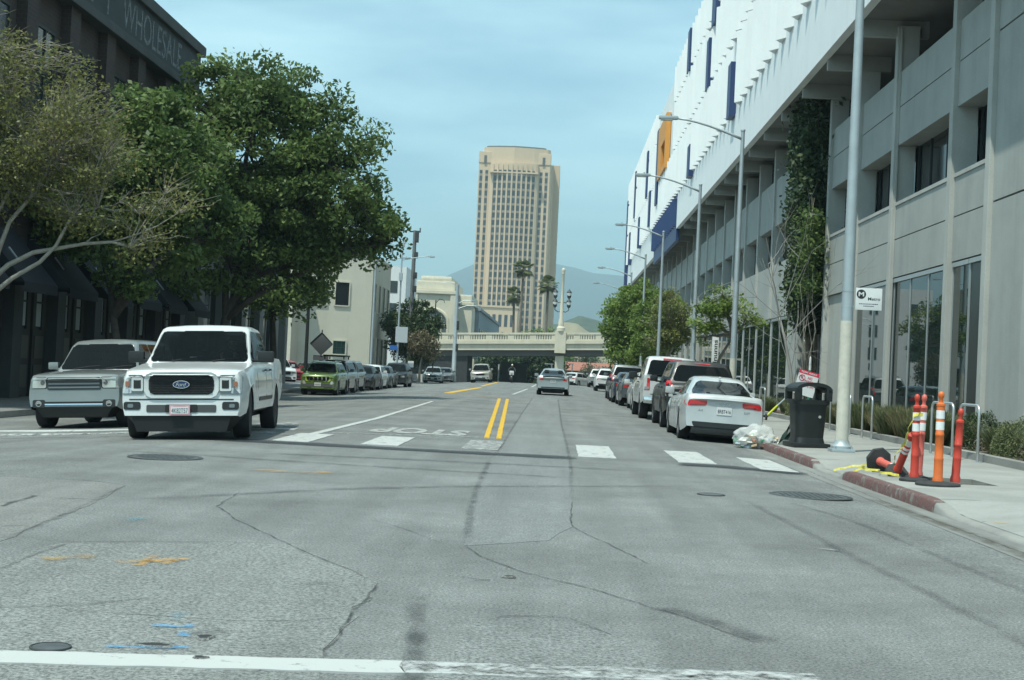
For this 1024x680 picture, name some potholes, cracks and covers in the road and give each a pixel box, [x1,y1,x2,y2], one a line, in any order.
crack [82,587,376,648]
crack [475,552,726,632]
manhole cover [769,491,853,500]
manhole cover [29,642,72,651]
